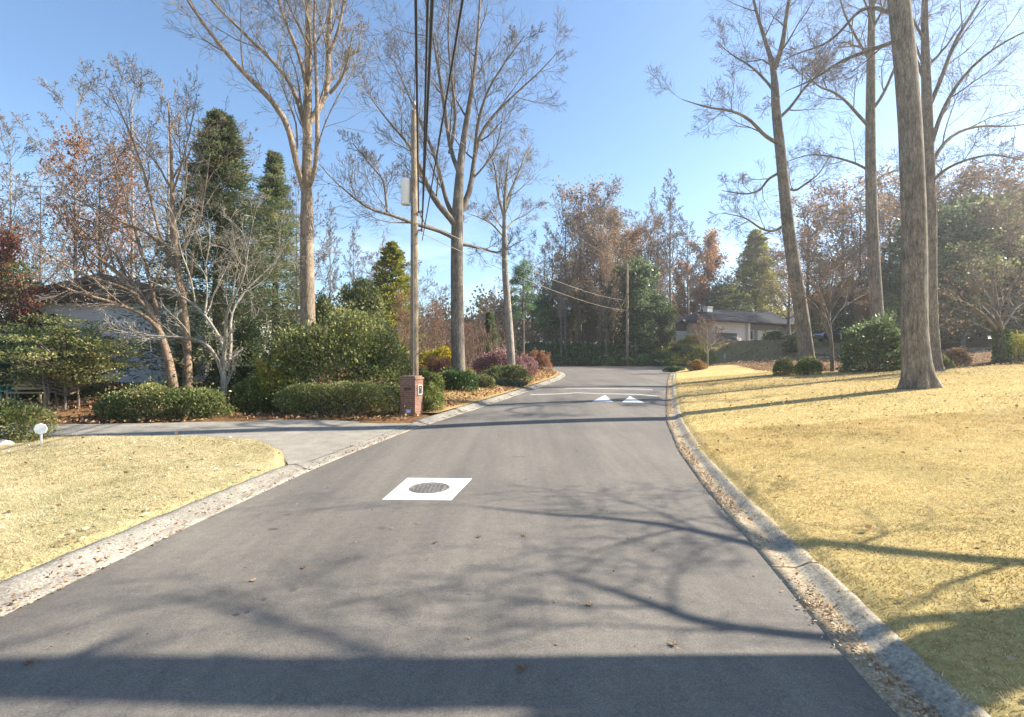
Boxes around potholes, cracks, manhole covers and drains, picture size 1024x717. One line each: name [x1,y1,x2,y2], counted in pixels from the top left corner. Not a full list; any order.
manhole cover [409,482,450,494]
